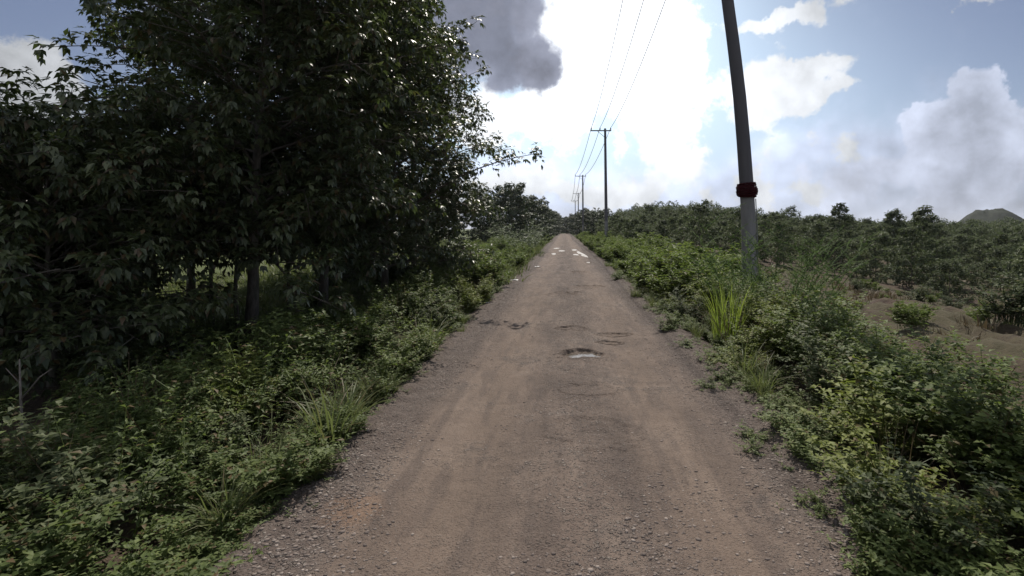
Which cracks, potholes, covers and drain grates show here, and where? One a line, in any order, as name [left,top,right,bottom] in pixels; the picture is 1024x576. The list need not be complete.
pothole [550,347,611,360]
